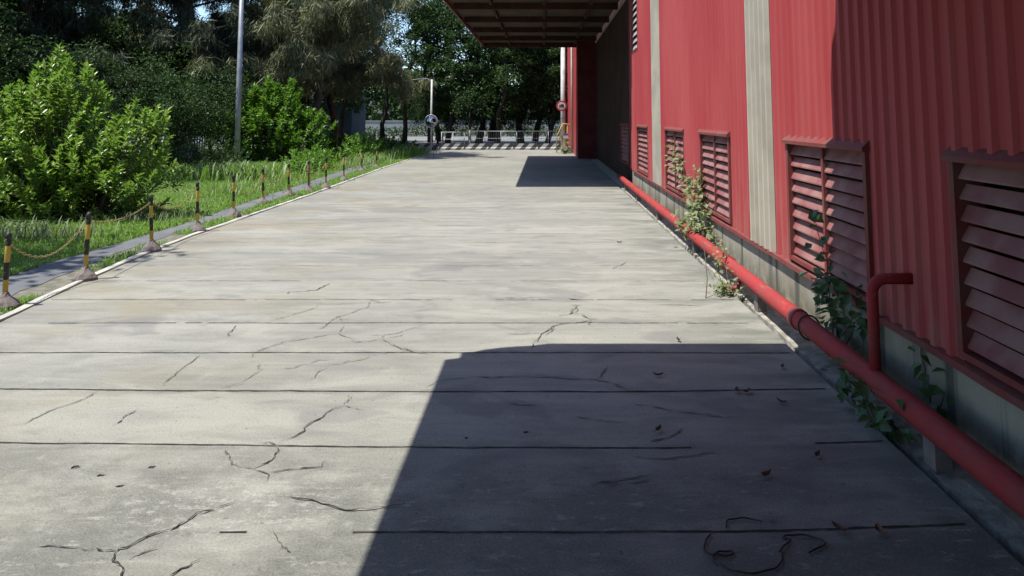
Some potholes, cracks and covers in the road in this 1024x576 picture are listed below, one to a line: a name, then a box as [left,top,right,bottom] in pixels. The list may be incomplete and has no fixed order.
crack [41,501,235,576]
crack [278,496,405,511]
crack [422,368,736,486]
crack [506,295,592,348]
crack [215,299,429,397]
crack [224,397,369,479]
